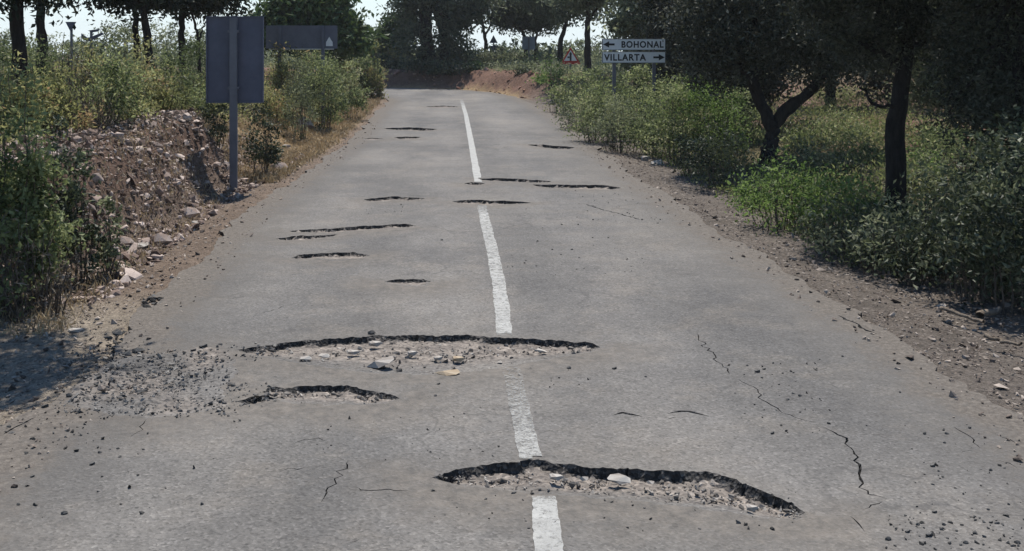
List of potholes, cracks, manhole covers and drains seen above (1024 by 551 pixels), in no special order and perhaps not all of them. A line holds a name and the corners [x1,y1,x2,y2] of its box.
pothole [263,385,399,406]
pothole [385,279,431,287]
pothole [292,252,369,261]
crack [323,463,404,499]
pothole [236,335,600,375]
pothole [291,224,415,233]
pothole [432,459,805,520]
crack [668,410,707,419]
pothole [237,394,278,405]
crack [698,335,884,529]
